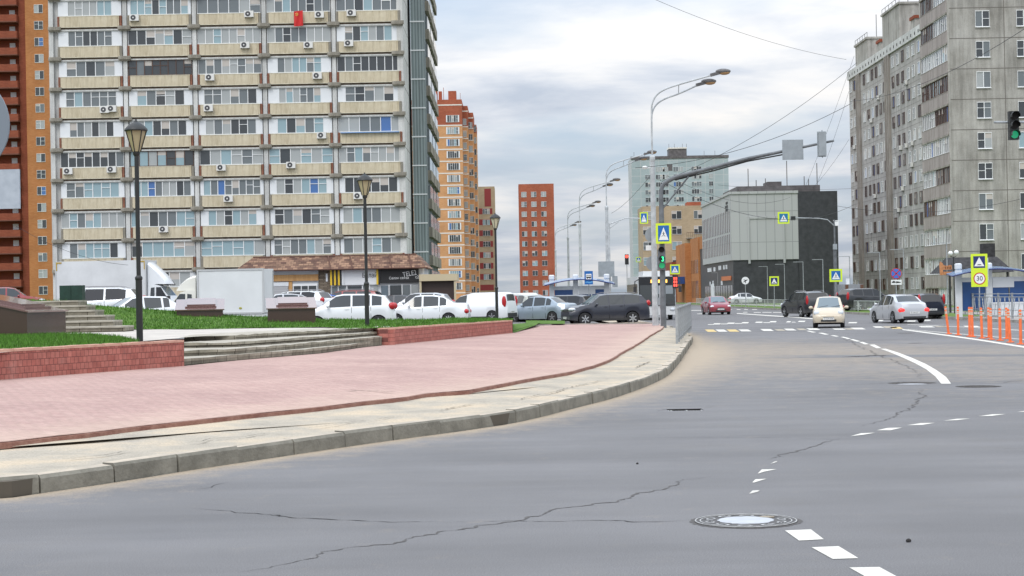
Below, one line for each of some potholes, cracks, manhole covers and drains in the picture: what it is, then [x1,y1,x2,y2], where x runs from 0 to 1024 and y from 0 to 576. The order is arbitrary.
crack [209,509,662,522]
manhole cover [689,513,803,529]
